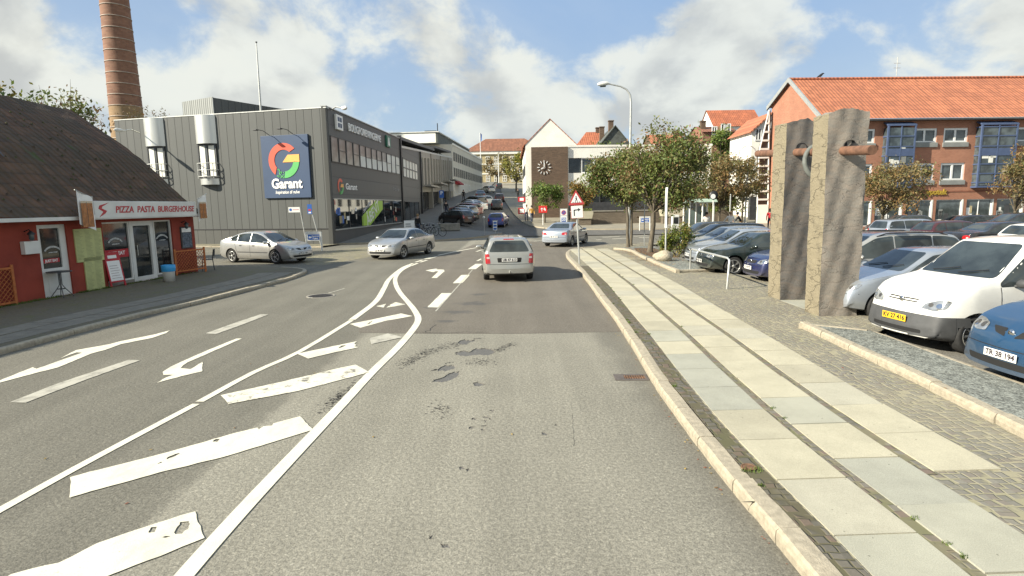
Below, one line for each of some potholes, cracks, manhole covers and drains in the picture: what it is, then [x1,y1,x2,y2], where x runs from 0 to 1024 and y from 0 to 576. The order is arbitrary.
pothole [432,371,461,382]
pothole [456,348,495,356]
